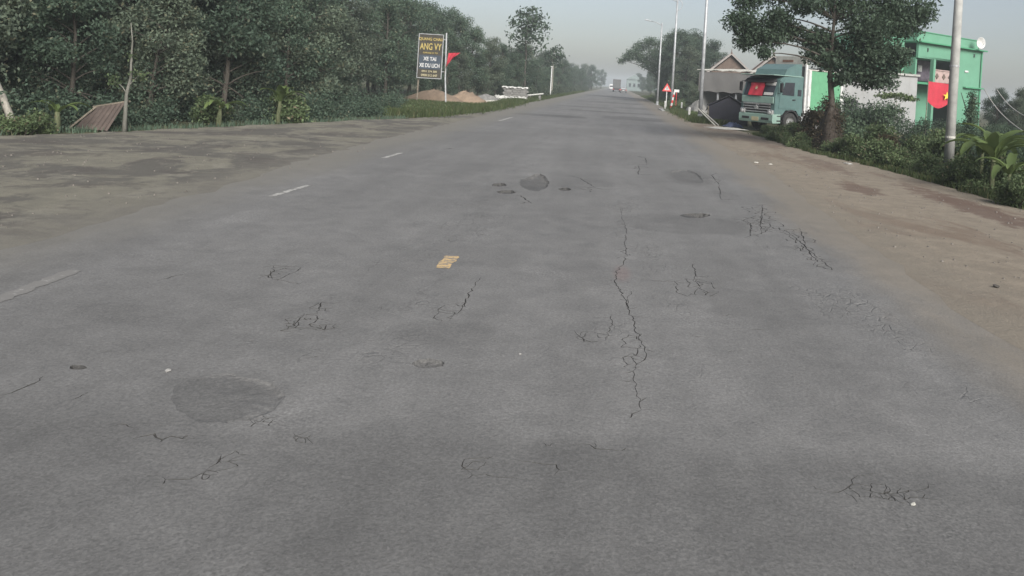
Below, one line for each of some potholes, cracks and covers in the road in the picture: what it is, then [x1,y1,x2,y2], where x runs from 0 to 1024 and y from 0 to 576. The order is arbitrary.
crack [461,443,559,479]
crack [433,277,481,321]
crack [812,473,941,503]
pothole [520,174,549,191]
pothole [412,358,445,368]
crack [260,265,303,284]
crack [575,208,719,418]
pothole [669,170,703,183]
crack [162,451,252,484]
crack [725,205,832,270]
crack [280,302,344,331]
